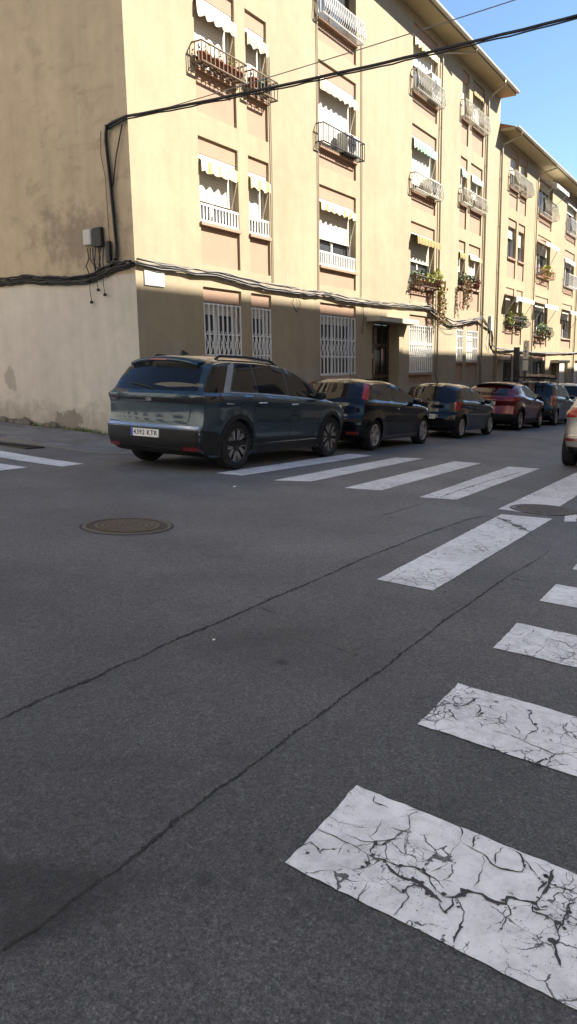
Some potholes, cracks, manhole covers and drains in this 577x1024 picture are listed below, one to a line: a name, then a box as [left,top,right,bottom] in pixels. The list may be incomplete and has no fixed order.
crack [0,516,492,720]
manhole cover [510,504,577,516]
manhole cover [79,517,174,535]
crack [0,551,549,952]
